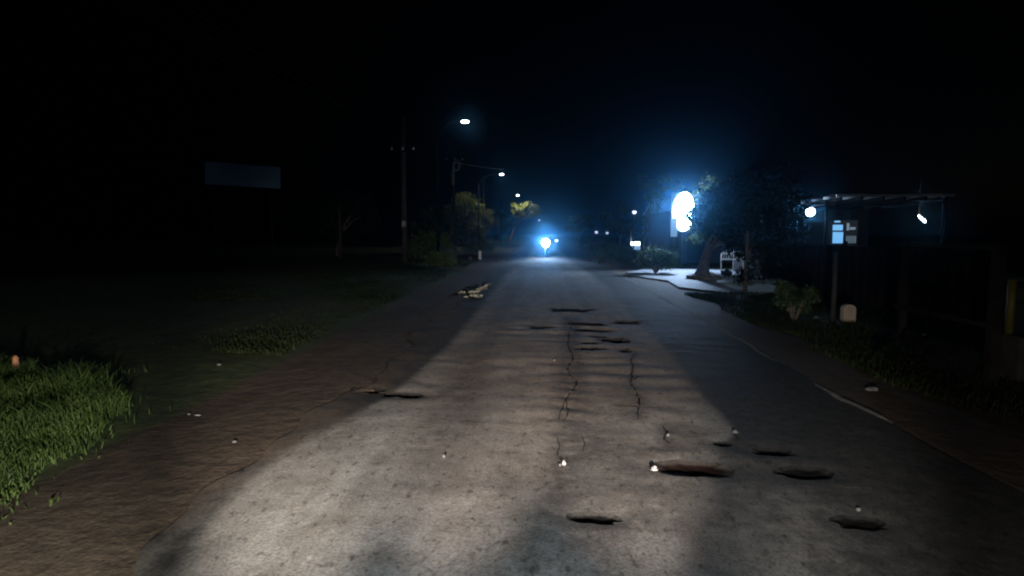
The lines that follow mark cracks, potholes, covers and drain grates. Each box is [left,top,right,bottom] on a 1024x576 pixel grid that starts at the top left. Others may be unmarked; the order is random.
pothole [773,466,835,480]
pothole [751,448,797,457]
crack [551,322,666,461]
pothole [653,460,736,478]
pothole [829,515,888,531]
pothole [566,511,623,525]
